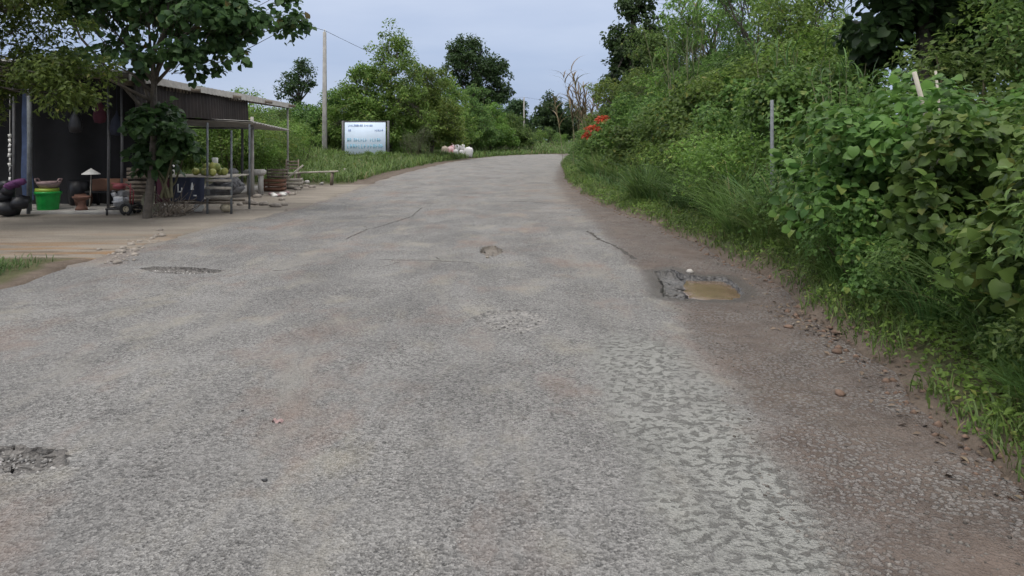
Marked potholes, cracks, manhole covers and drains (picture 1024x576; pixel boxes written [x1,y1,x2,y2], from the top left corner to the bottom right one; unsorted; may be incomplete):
pothole [654,269,745,300]
crack [345,195,469,240]
pothole [480,246,503,256]
pothole [140,266,226,274]
pothole [0,444,72,477]
